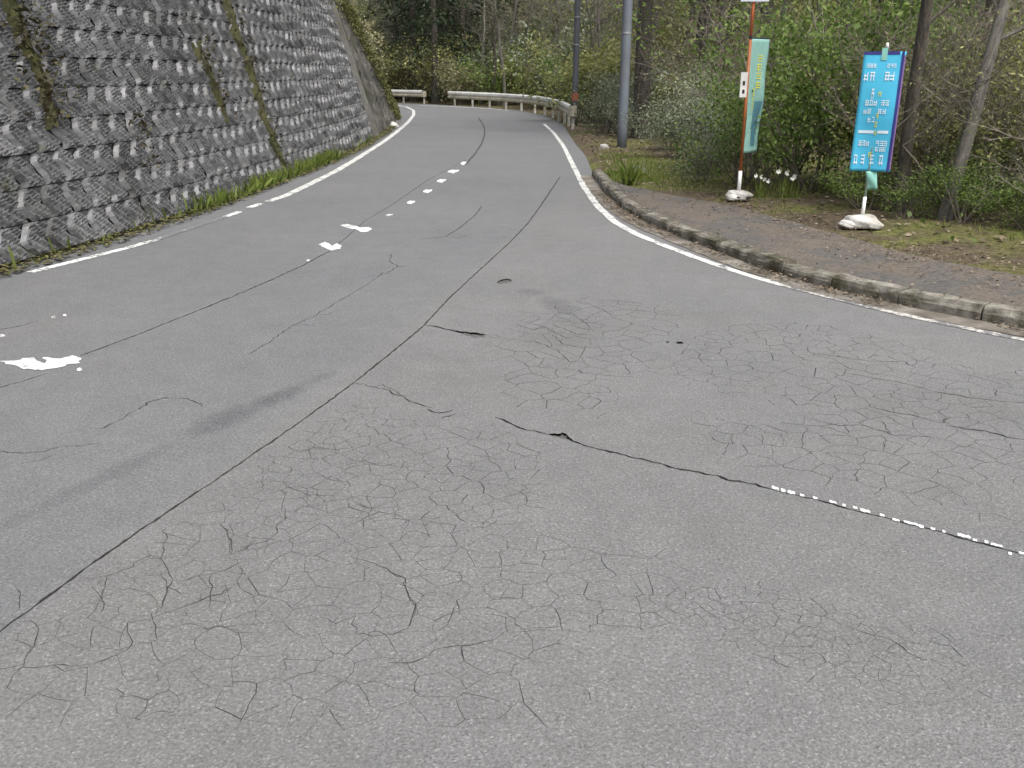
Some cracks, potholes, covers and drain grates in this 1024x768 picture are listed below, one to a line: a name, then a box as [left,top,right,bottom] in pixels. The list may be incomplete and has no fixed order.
crack [673,323,1024,521]
crack [1,397,203,464]
crack [250,254,403,354]
crack [259,401,548,540]
crack [650,579,991,713]
crack [355,382,1024,555]
crack [0,465,688,736]
crack [482,298,683,419]
